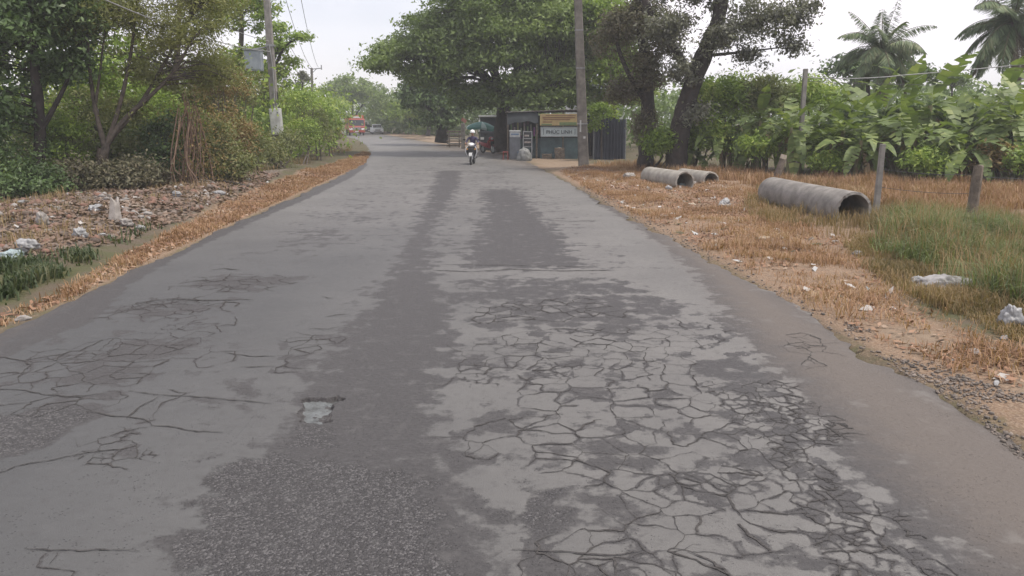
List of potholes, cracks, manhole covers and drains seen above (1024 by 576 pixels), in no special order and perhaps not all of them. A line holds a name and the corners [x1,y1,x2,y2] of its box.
crack [28,548,138,576]
crack [427,319,958,576]
crack [0,268,347,472]
